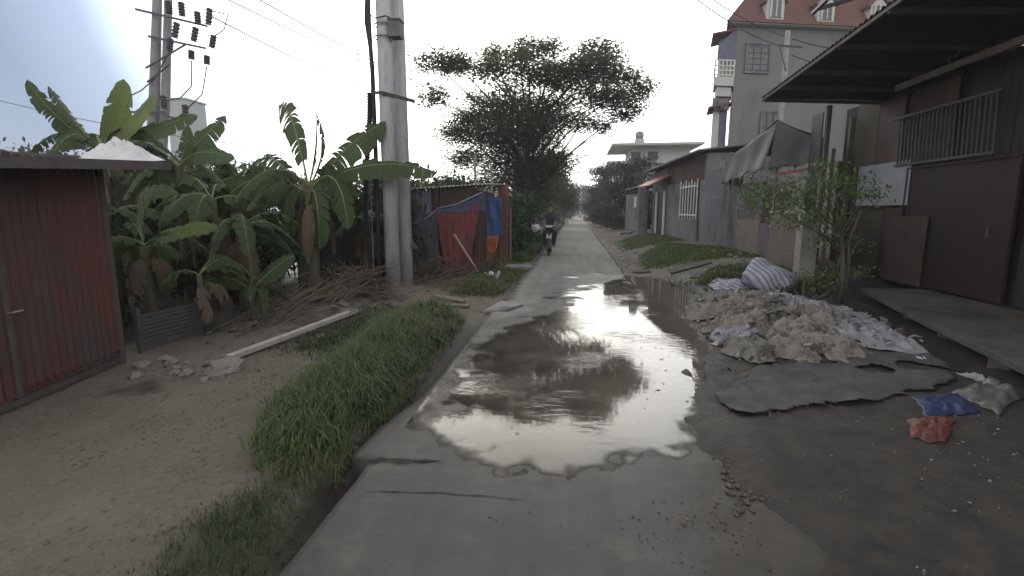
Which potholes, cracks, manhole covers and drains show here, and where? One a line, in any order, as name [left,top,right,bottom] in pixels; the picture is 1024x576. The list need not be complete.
crack [373,491,520,500]
